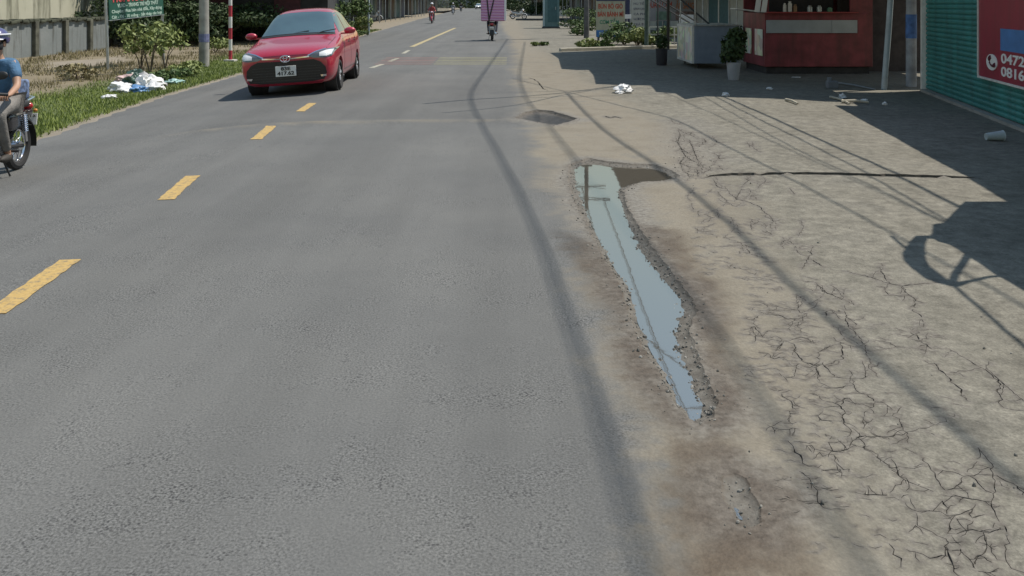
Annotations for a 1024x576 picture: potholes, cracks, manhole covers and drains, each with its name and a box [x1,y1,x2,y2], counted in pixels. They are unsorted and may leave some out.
pothole [721,473,762,527]
pothole [515,110,577,125]
pothole [568,158,719,423]
crack [742,276,1024,576]
crack [671,119,823,281]
